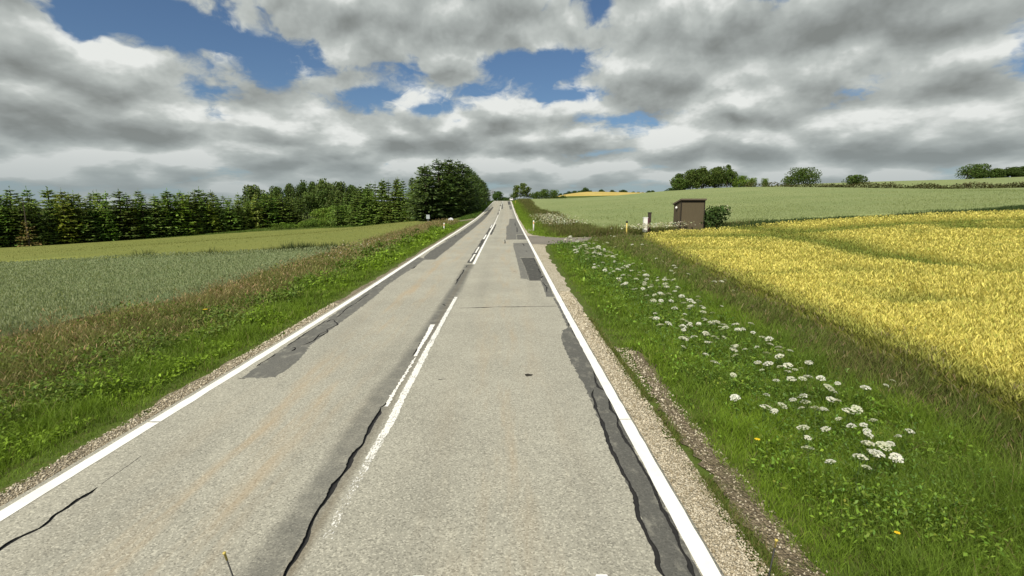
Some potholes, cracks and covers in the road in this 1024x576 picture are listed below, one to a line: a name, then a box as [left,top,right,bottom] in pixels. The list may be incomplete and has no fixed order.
crack [562,310,695,576]
crack [0,456,141,551]
crack [283,403,387,576]
